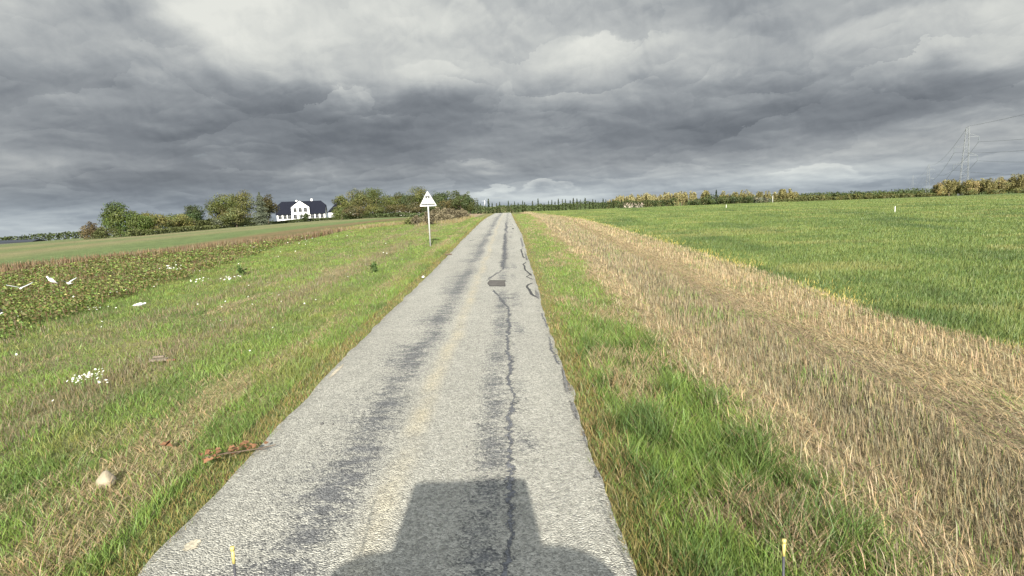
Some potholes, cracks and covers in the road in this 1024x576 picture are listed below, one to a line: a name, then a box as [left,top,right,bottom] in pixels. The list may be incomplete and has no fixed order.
crack [487,222,560,576]
